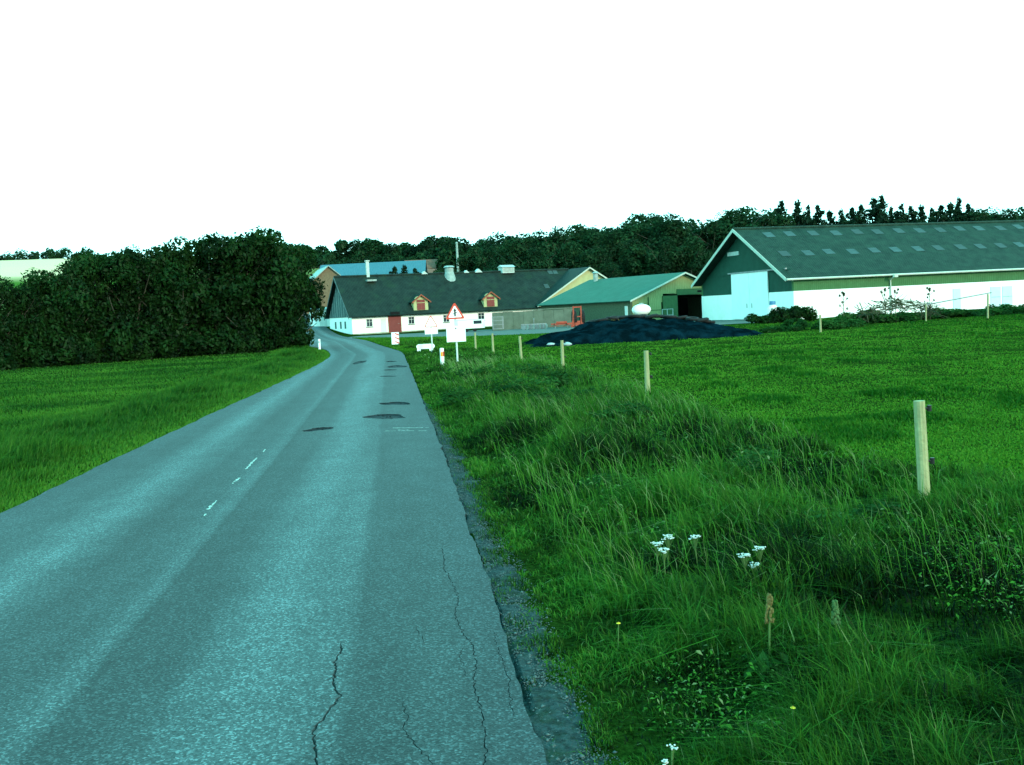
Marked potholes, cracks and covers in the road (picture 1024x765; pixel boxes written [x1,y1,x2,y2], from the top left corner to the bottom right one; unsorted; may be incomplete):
crack [402,699,433,765]
crack [441,548,488,765]
crack [311,643,343,765]
